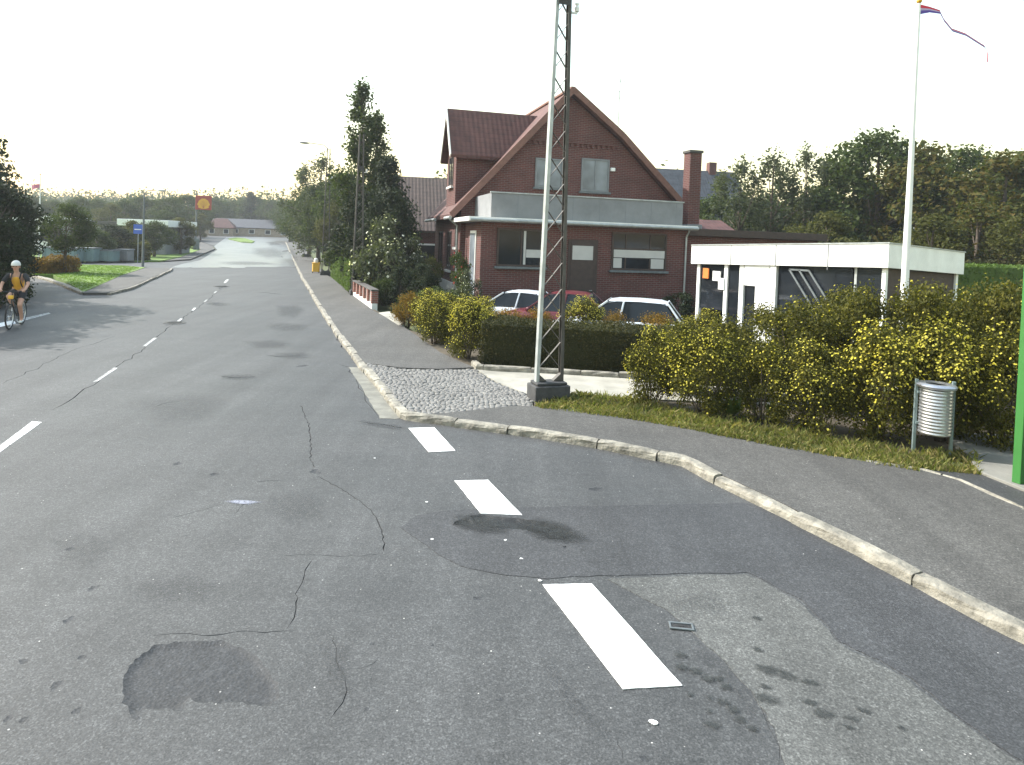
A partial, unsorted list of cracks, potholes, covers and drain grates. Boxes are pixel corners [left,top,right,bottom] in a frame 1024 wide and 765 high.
crack [154,406,385,636]
crack [330,637,375,719]
